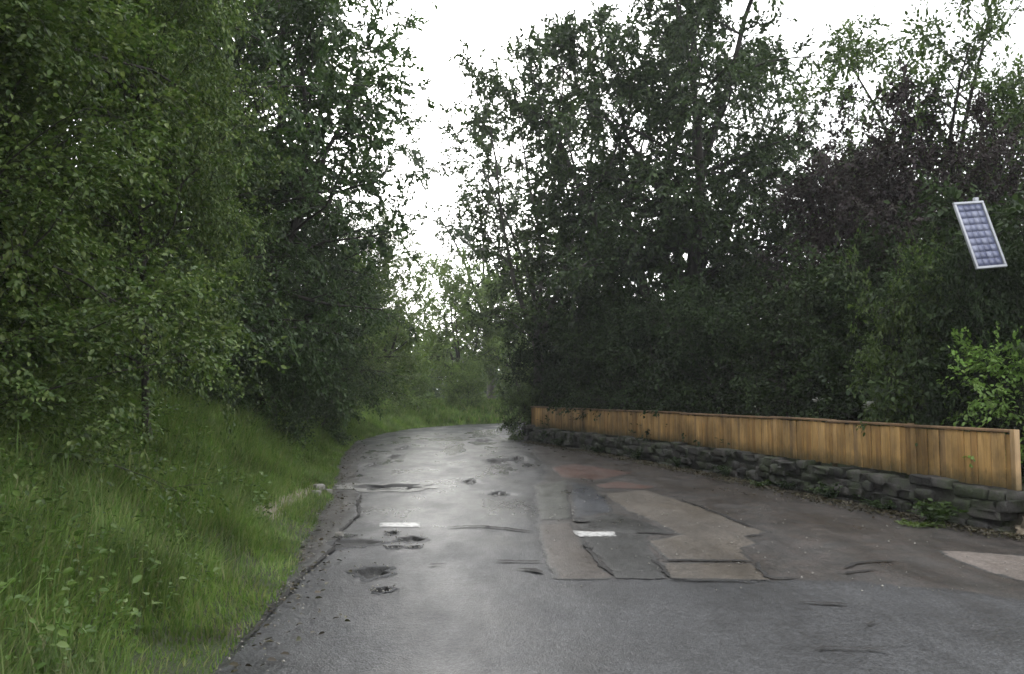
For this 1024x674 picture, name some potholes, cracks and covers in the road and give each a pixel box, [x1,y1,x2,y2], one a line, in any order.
pothole [345,566,398,582]
pothole [332,482,437,492]
pothole [392,535,431,544]
crack [501,560,543,572]
pothole [371,586,396,595]
crack [844,560,896,573]
